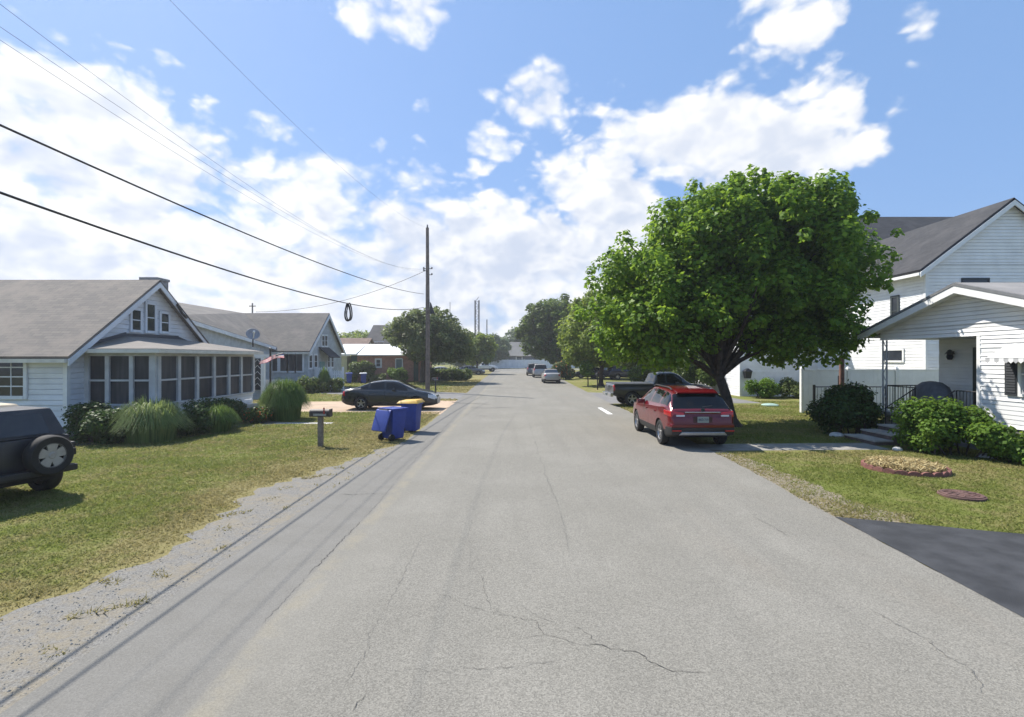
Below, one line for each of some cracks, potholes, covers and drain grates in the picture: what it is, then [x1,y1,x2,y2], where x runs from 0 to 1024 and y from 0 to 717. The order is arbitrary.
crack [445,525,708,676]
crack [874,611,983,690]
manhole cover [937,489,988,502]
crack [346,549,547,711]
